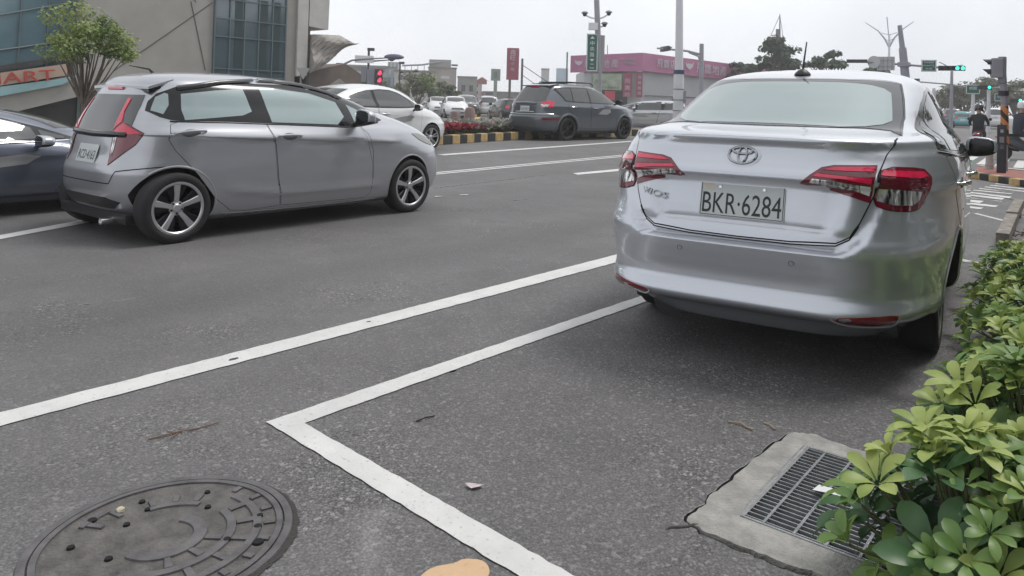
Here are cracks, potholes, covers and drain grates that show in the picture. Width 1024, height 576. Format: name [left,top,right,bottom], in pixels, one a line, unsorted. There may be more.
drain grate [735,445,941,569]
manhole cover [13,475,300,576]
